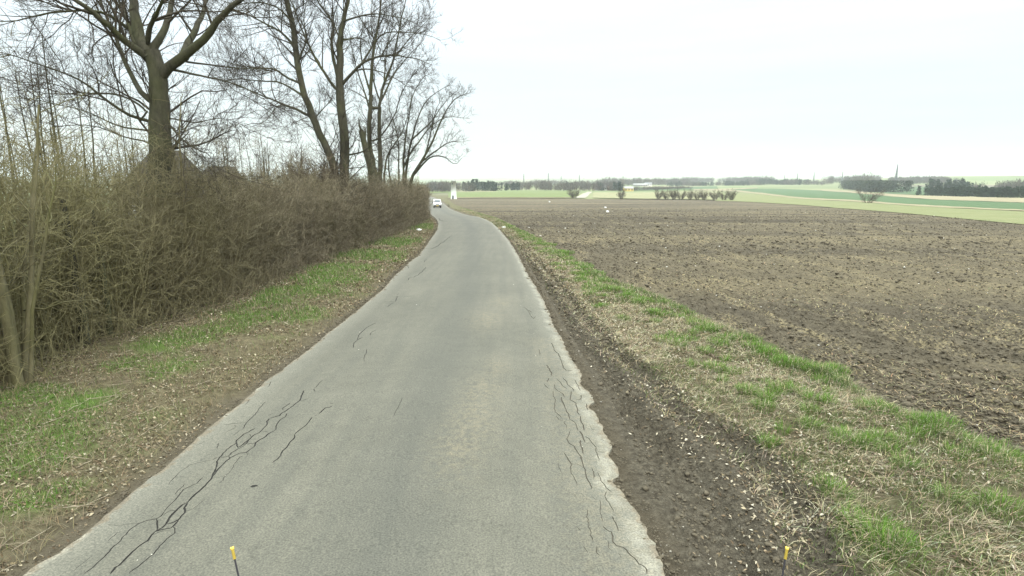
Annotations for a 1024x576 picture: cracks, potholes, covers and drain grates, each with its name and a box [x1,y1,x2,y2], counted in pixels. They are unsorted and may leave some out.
crack [539,343,648,574]
crack [78,382,332,574]
